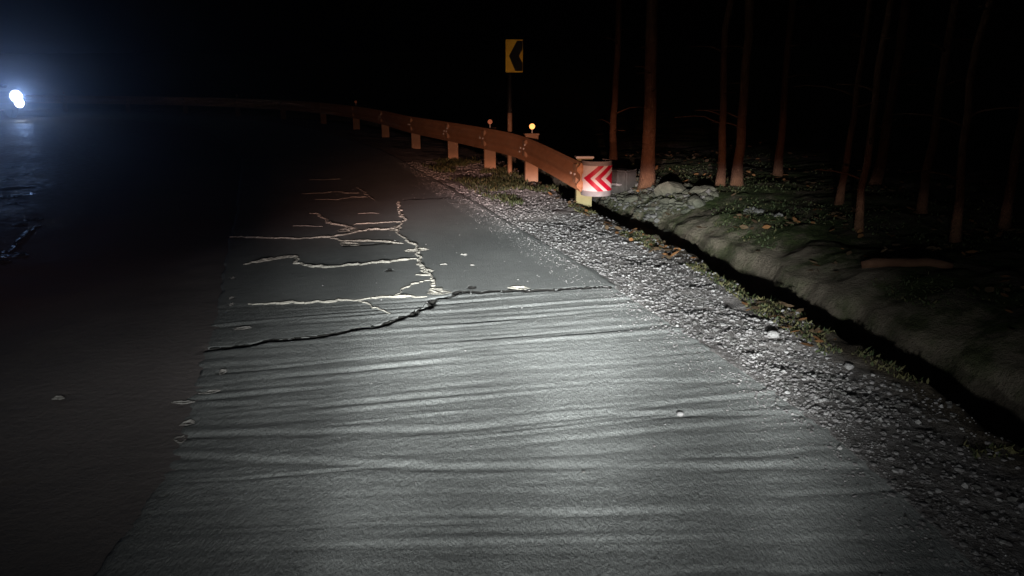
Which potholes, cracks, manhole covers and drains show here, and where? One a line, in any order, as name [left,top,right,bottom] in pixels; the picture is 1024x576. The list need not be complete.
crack [210,179,612,351]
